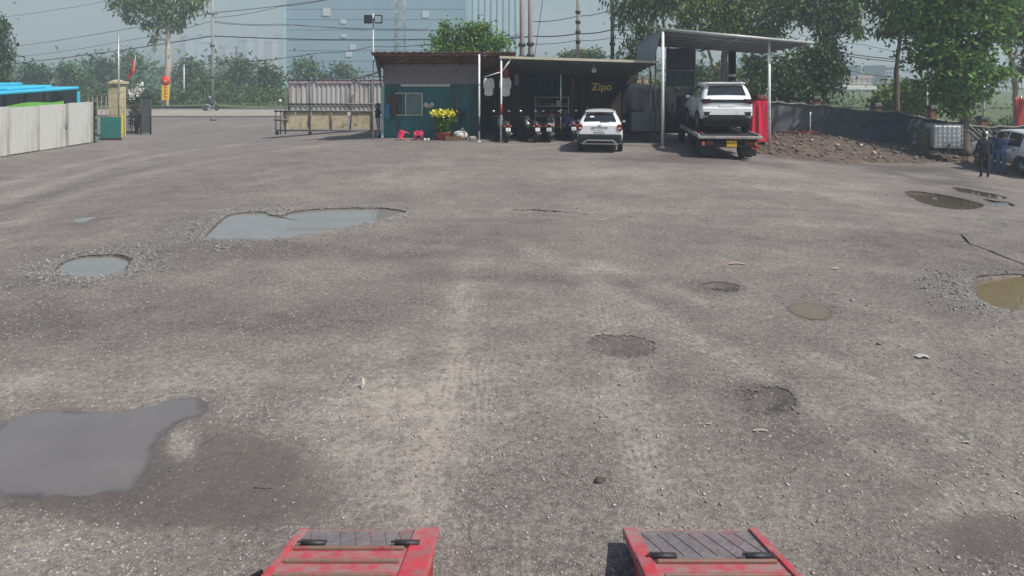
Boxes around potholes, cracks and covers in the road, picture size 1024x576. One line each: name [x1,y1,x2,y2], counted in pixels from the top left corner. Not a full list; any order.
crack [936,231,1024,270]
pothole [875,187,1010,216]
crack [501,207,582,218]
pothole [0,380,246,527]
pothole [568,328,674,367]
pothole [687,278,756,298]
